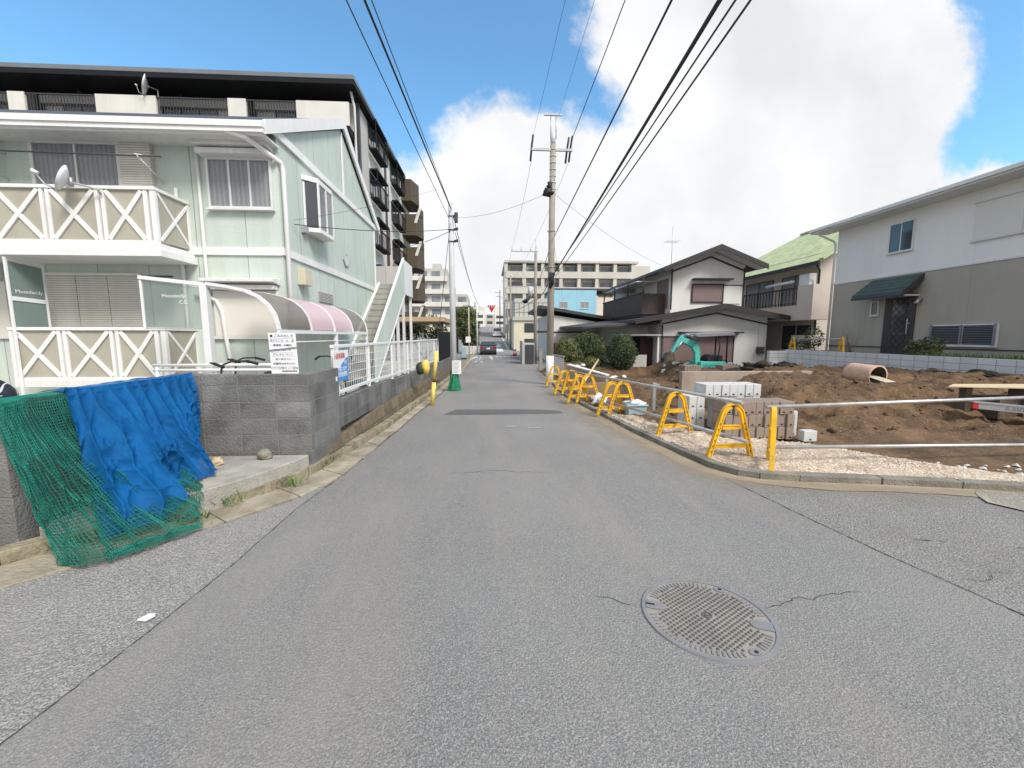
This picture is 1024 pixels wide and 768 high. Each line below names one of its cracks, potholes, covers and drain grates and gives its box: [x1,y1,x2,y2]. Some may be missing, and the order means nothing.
crack [725,478,1024,615]
manhole cover [641,579,782,665]
